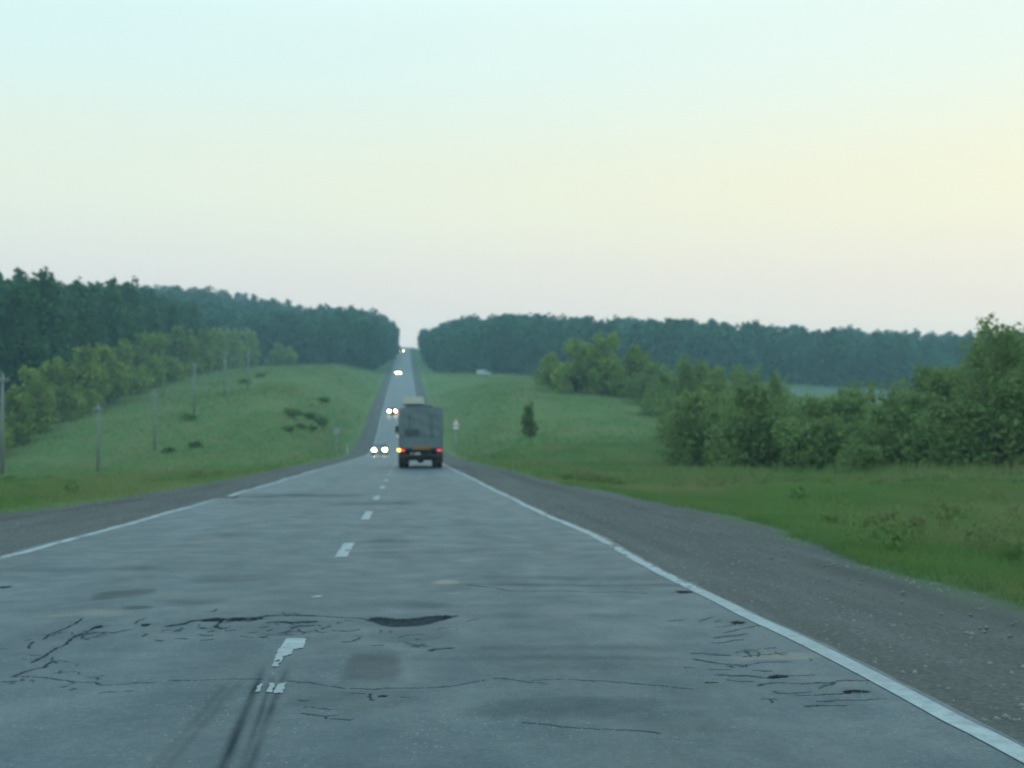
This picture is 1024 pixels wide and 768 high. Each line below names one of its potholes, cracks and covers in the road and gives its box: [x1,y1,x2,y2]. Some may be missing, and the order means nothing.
crack [163,609,476,651]
crack [1,618,692,701]
crack [297,700,352,721]
crack [674,617,879,707]
pothole [369,615,457,627]
